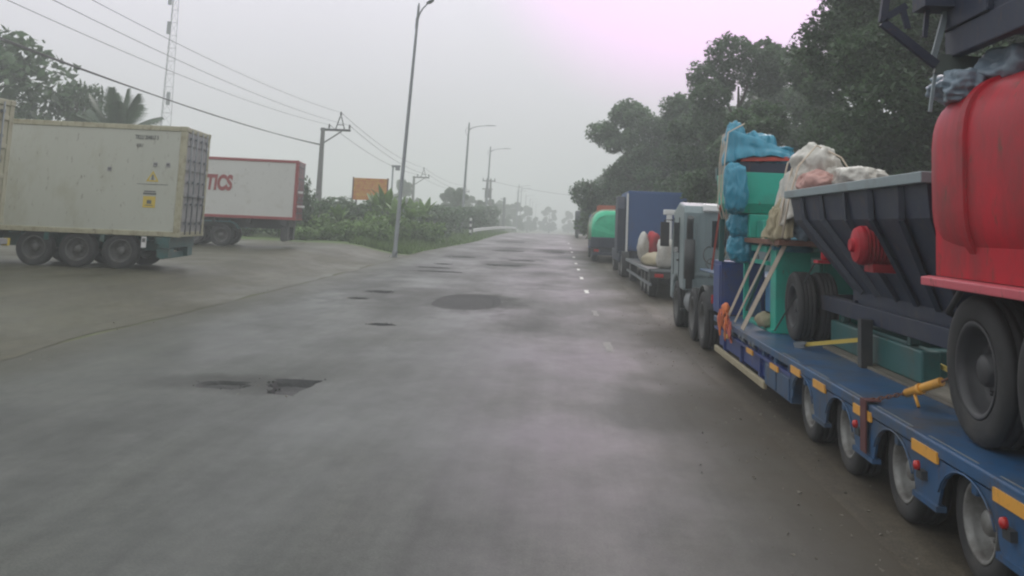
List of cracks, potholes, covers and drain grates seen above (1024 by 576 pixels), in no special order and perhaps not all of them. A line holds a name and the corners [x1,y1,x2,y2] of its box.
pothole [193,381,251,390]
pothole [266,378,326,396]
